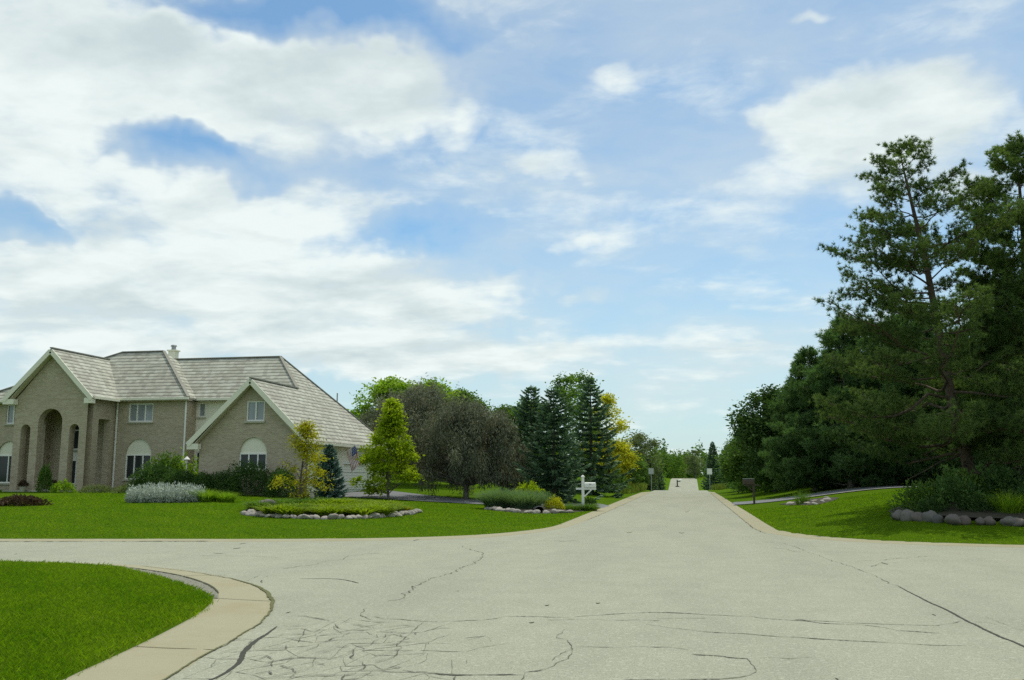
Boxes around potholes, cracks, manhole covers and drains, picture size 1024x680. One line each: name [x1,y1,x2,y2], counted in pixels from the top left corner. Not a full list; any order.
crack [184,608,959,680]
